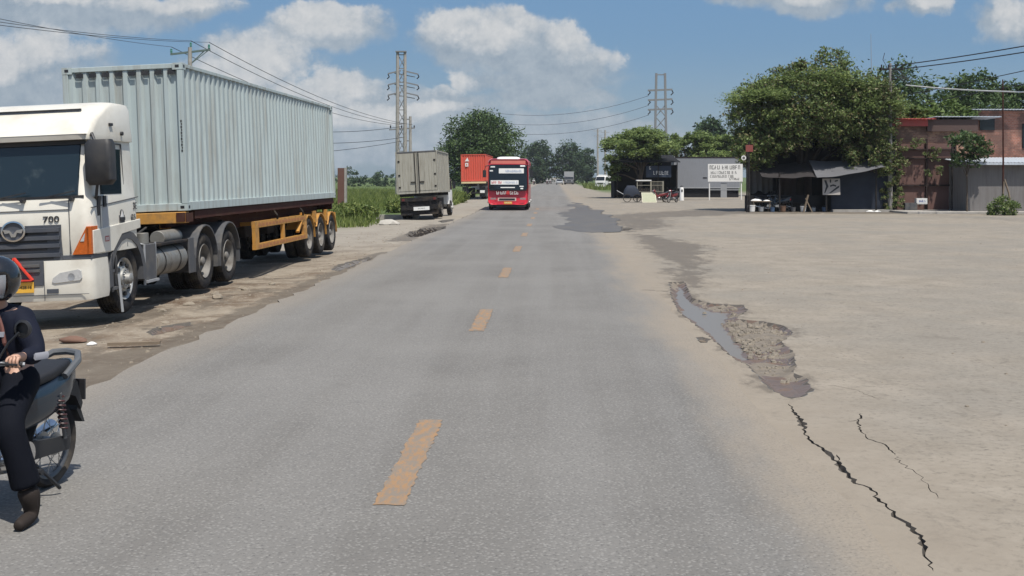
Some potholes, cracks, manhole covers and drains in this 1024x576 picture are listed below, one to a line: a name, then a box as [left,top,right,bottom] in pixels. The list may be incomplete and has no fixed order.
pothole [405,226,447,237]
crack [788,386,938,570]
pothole [668,281,814,399]
